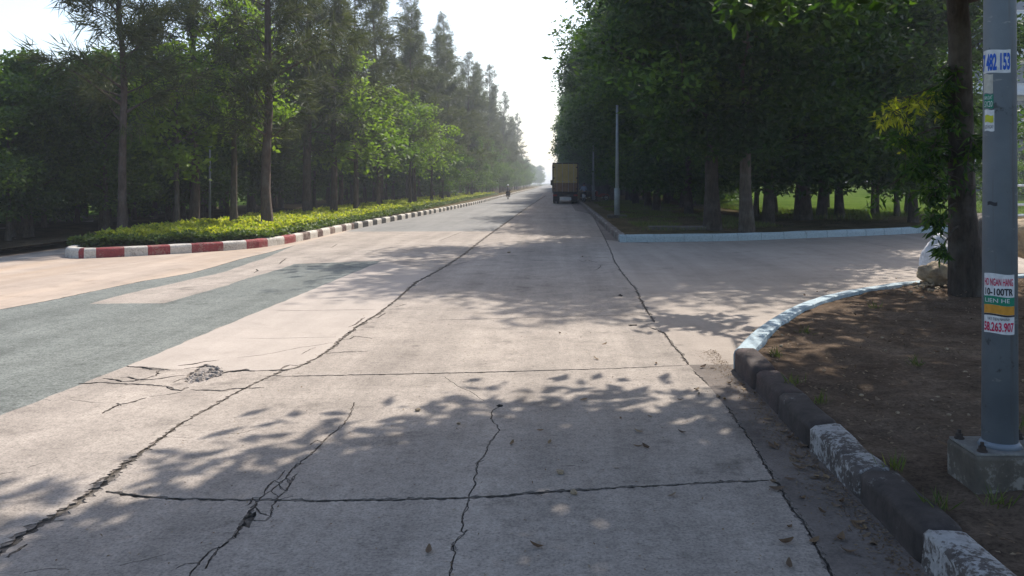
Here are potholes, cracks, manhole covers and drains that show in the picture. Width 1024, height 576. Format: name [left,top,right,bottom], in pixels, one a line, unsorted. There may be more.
crack [25,402,355,576]
crack [579,241,836,576]
pothole [184,364,224,384]
crack [44,342,333,414]
crack [445,377,500,576]
